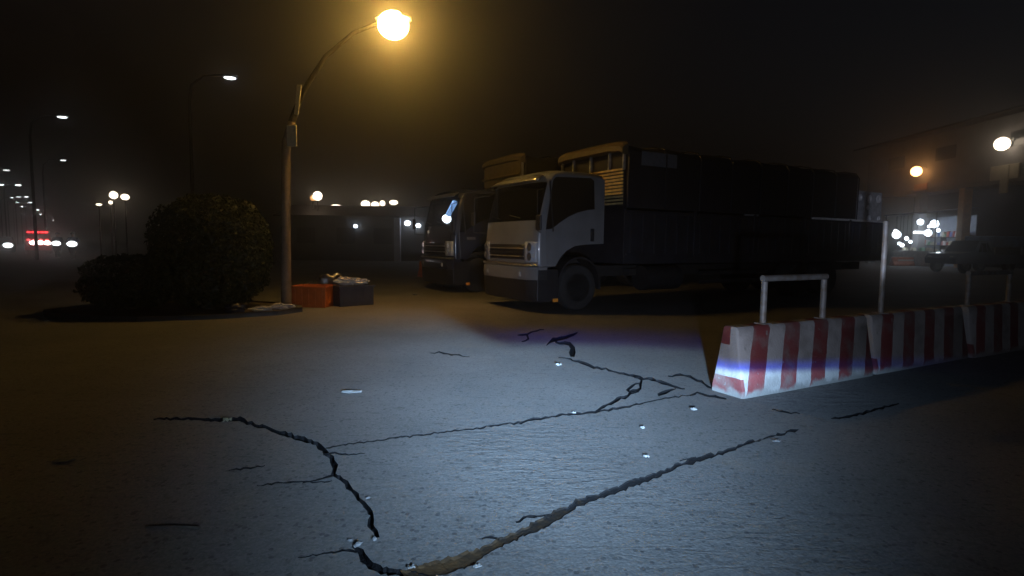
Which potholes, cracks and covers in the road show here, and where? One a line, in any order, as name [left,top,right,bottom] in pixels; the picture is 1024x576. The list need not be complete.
crack [518,329,727,413]
crack [154,409,800,576]
crack [831,403,899,419]
